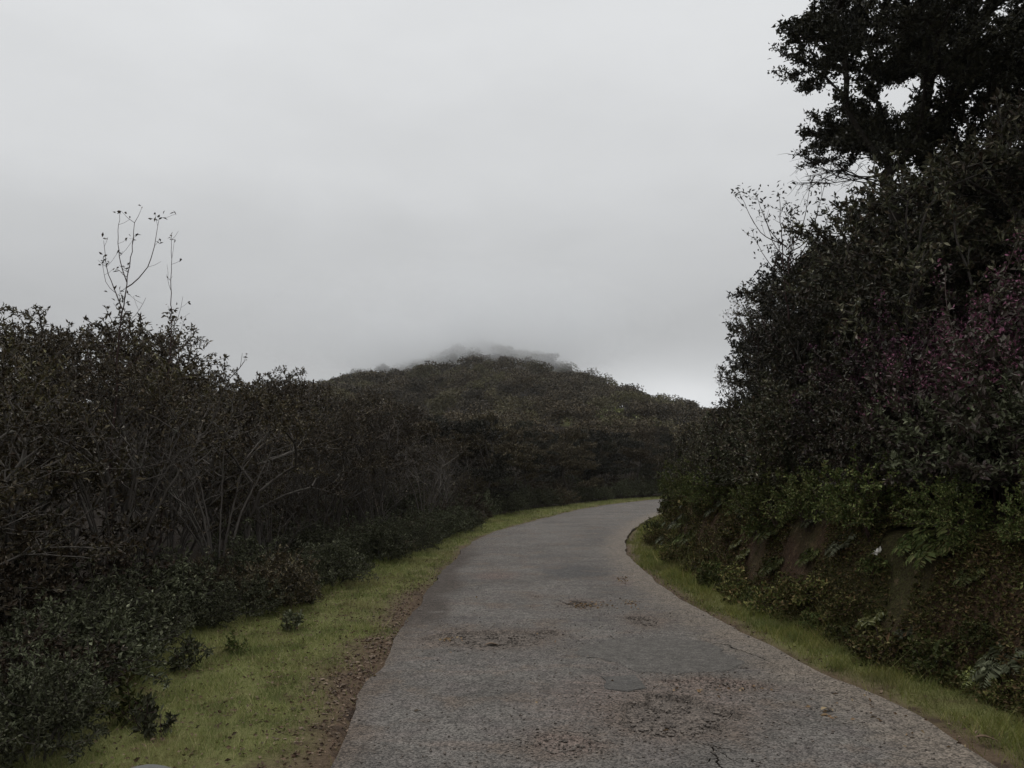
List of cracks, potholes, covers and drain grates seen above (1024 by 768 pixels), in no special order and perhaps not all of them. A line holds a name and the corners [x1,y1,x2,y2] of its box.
crack [695,742,763,768]
pothole [626,615,659,627]
pothole [419,630,562,648]
